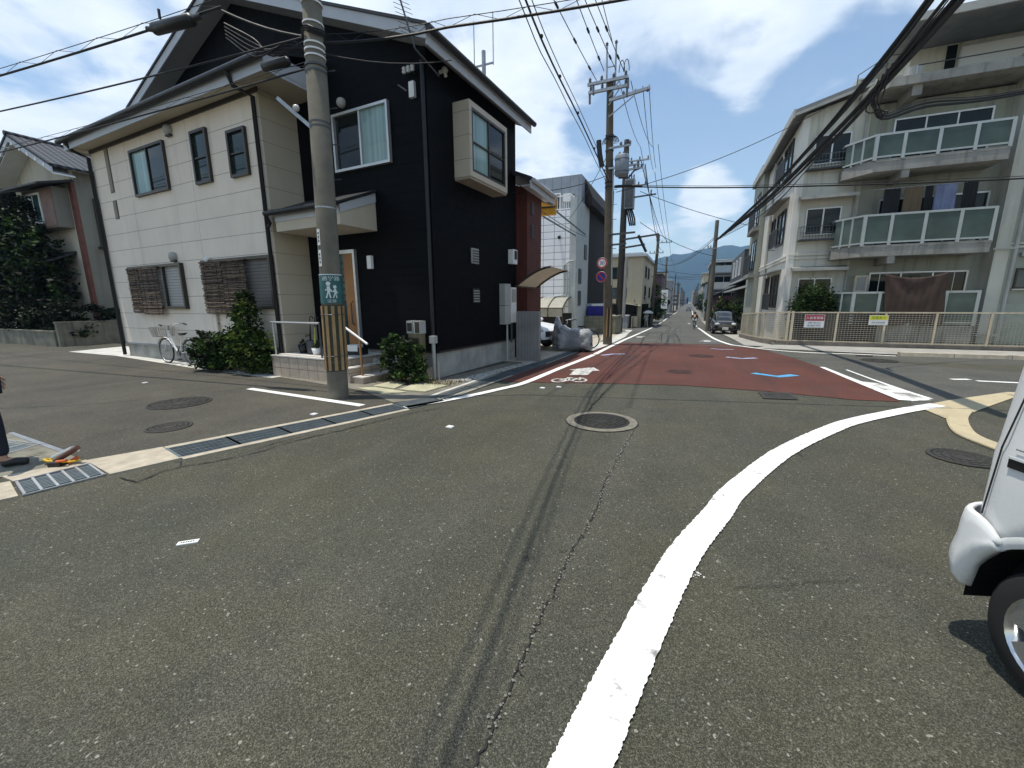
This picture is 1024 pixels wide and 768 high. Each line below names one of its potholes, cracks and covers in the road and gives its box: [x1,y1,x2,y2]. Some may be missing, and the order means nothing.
utility cover [759,392,799,400]
manhole cover [143,421,193,433]
manhole cover [145,397,212,410]
drain grate [13,463,107,496]
crack [467,429,634,768]
manhole cover [925,448,993,468]
crack [120,407,442,482]
manhole cover [566,412,639,432]
